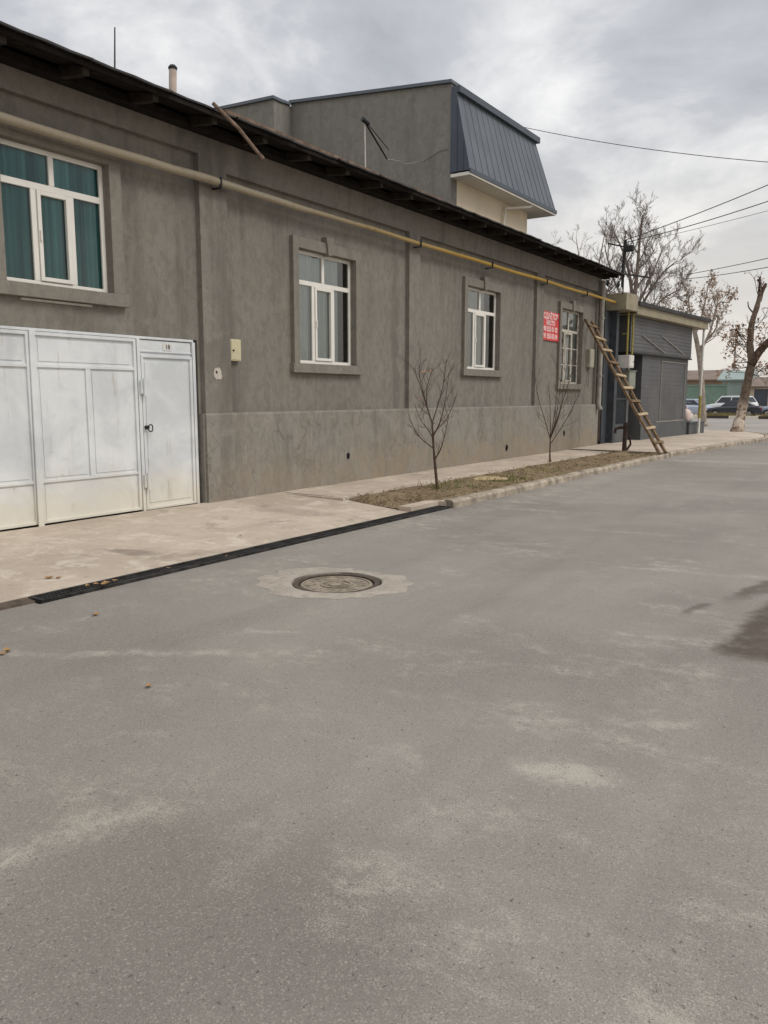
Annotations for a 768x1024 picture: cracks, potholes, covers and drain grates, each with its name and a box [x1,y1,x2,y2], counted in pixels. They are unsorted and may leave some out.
manhole cover [254,567,414,599]
